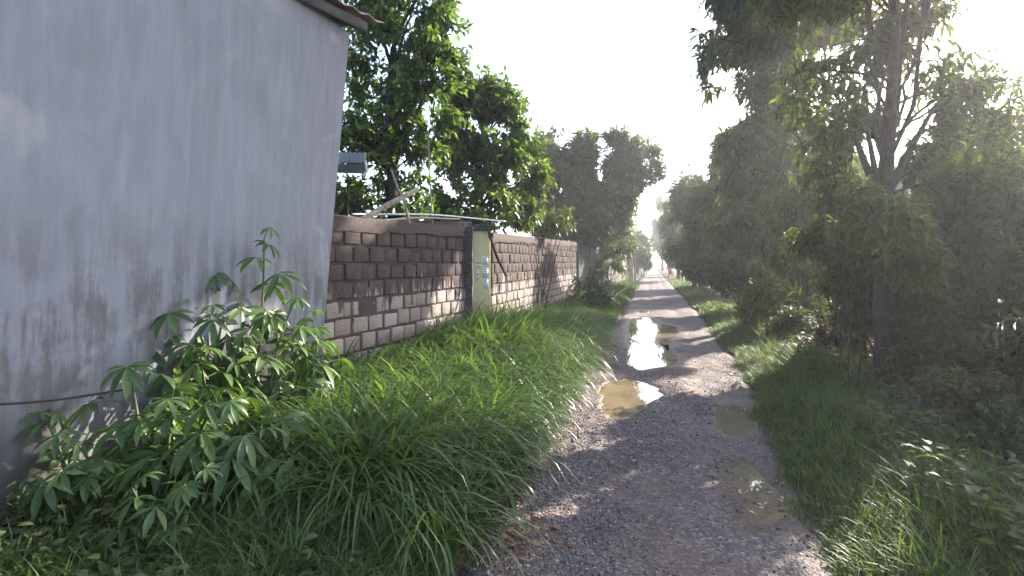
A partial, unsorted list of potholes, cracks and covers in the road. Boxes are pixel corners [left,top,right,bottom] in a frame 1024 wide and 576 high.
pothole [699,398,776,443]
pothole [701,453,812,540]
pothole [584,375,674,422]
pothole [617,315,688,371]
